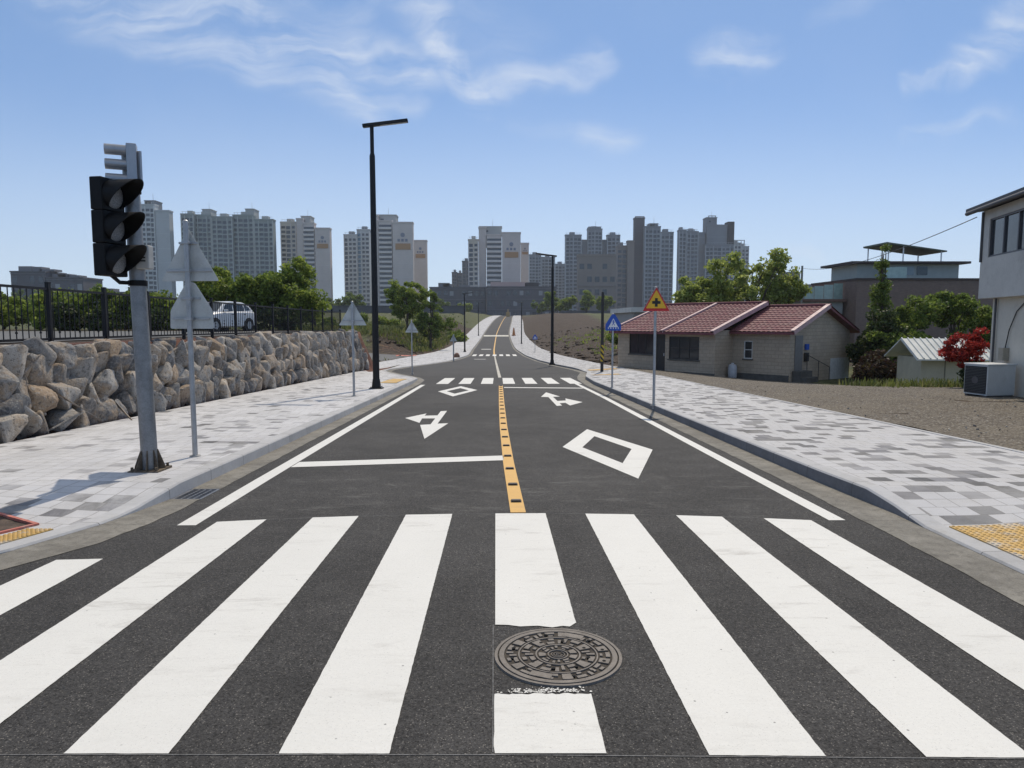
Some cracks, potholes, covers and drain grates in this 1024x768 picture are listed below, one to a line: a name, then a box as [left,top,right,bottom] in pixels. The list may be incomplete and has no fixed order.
drain grate [173,489,220,501]
manhole cover [494,628,623,688]
